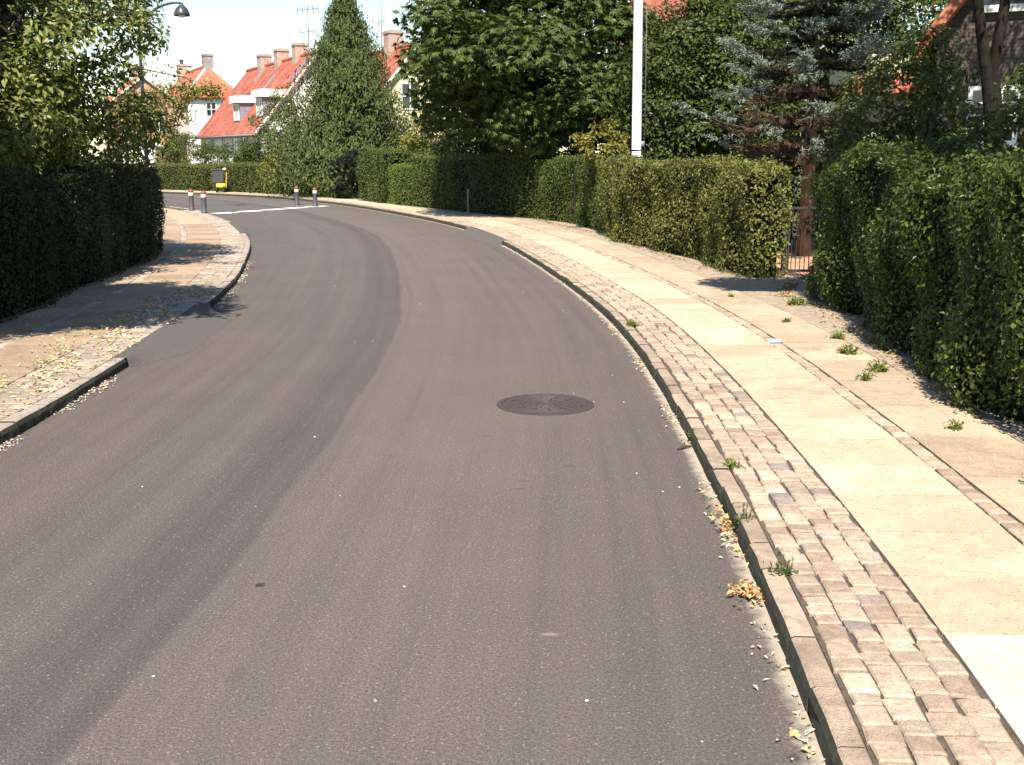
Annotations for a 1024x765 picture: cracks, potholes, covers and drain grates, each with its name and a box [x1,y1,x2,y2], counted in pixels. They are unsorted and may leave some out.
manhole cover [497,394,594,416]
